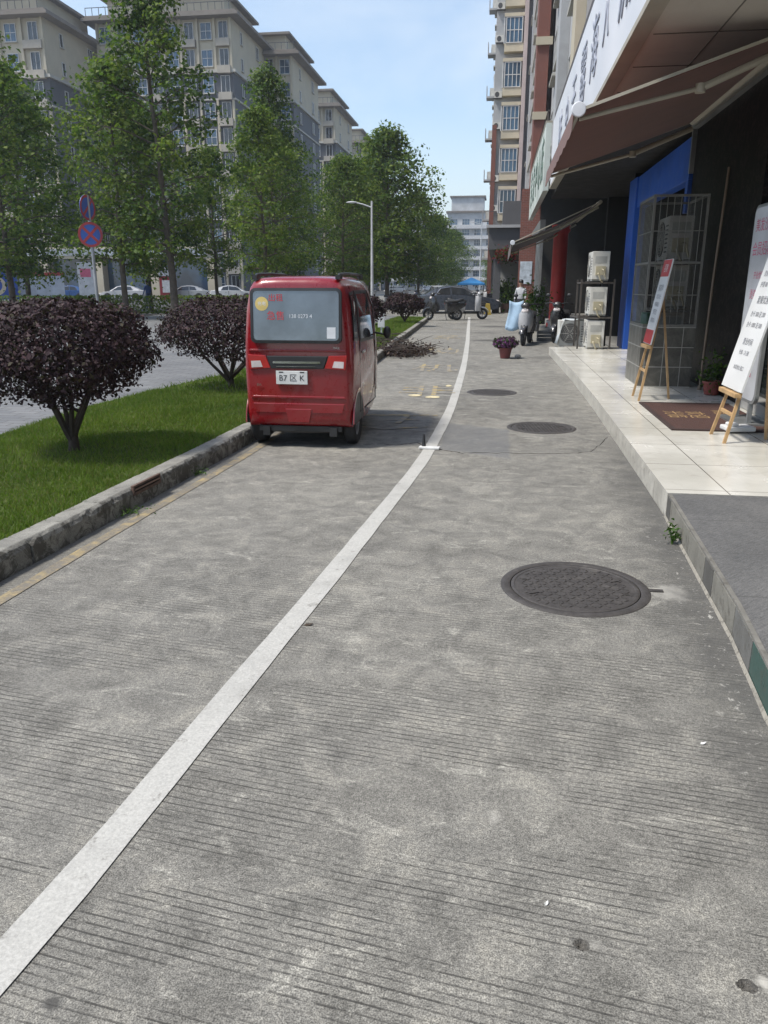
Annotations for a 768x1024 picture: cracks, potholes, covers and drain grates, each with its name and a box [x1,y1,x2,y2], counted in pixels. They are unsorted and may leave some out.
drain grate [131,473,161,496]
pothole [735,979,759,994]
manhole cover [507,422,576,434]
manhole cover [501,562,664,618]
